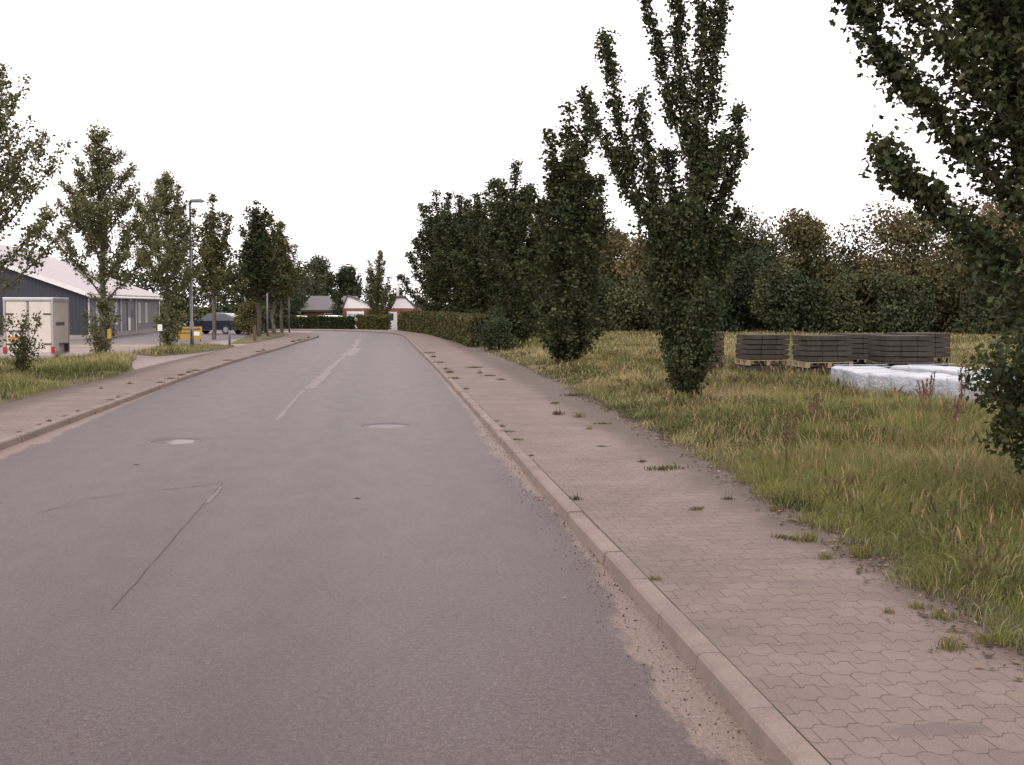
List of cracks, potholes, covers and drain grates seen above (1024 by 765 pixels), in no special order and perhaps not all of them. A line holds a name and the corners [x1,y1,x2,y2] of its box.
manhole cover [127,436,218,445]
